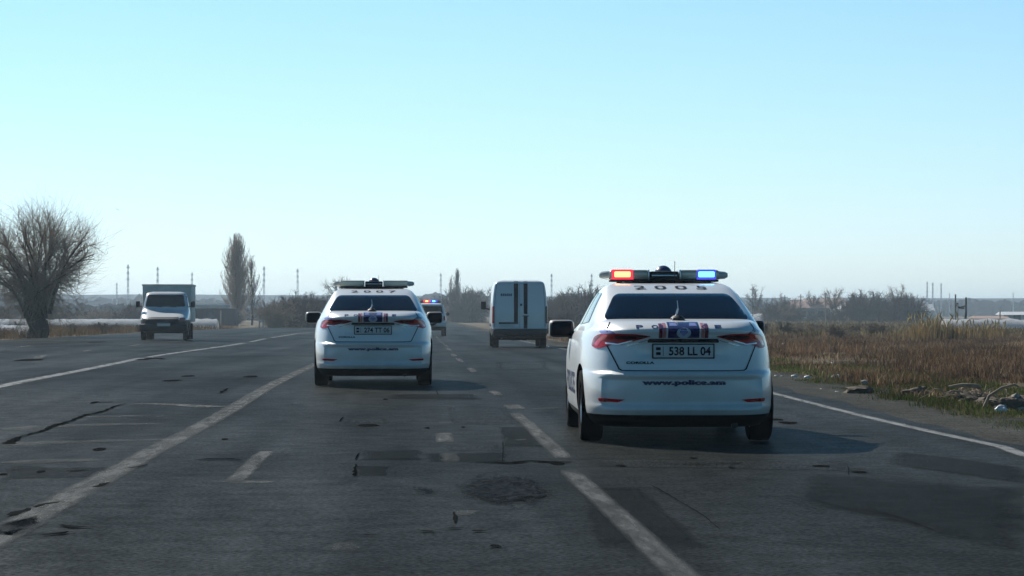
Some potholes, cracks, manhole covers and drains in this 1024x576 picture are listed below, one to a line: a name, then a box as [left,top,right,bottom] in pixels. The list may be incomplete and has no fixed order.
crack [3,403,126,444]
